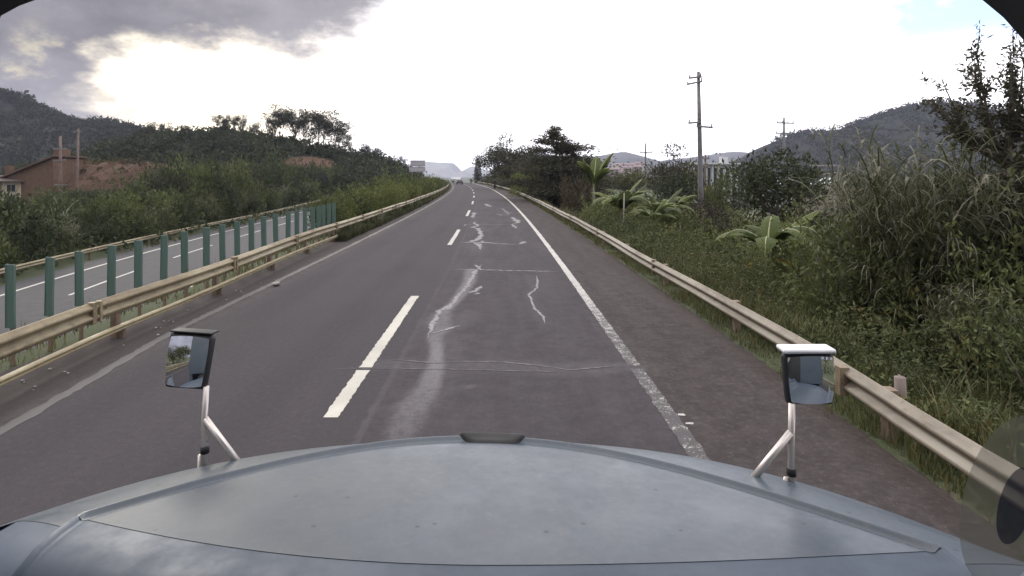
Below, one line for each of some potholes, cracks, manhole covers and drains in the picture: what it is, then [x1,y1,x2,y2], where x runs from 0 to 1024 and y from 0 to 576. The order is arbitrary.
crack [335,359,610,372]
crack [428,204,545,337]
